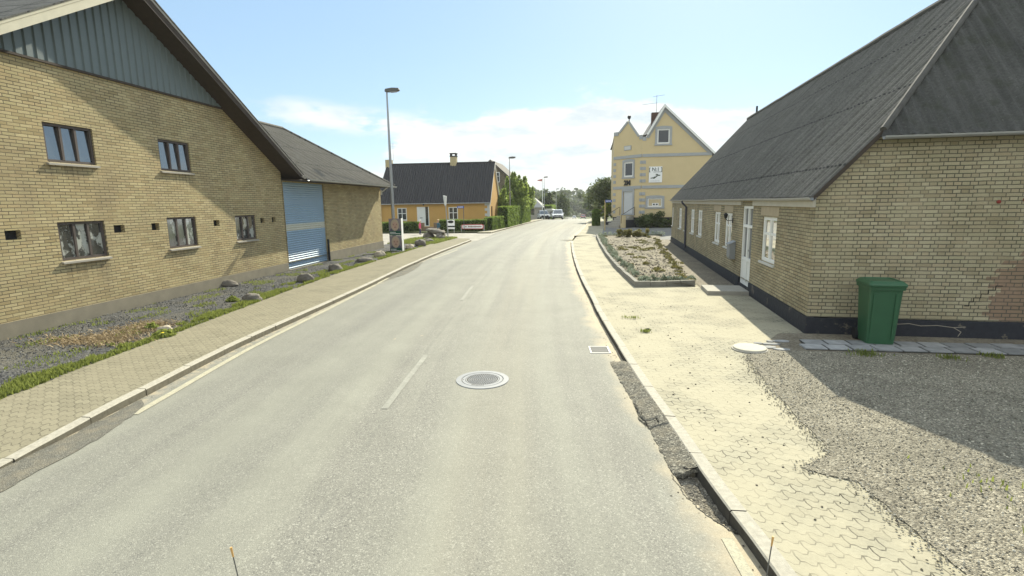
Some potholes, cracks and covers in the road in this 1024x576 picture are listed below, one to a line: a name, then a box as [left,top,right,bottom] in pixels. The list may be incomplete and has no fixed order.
manhole cover [731,343,769,354]
drain grate [588,346,611,354]
manhole cover [456,371,509,389]
